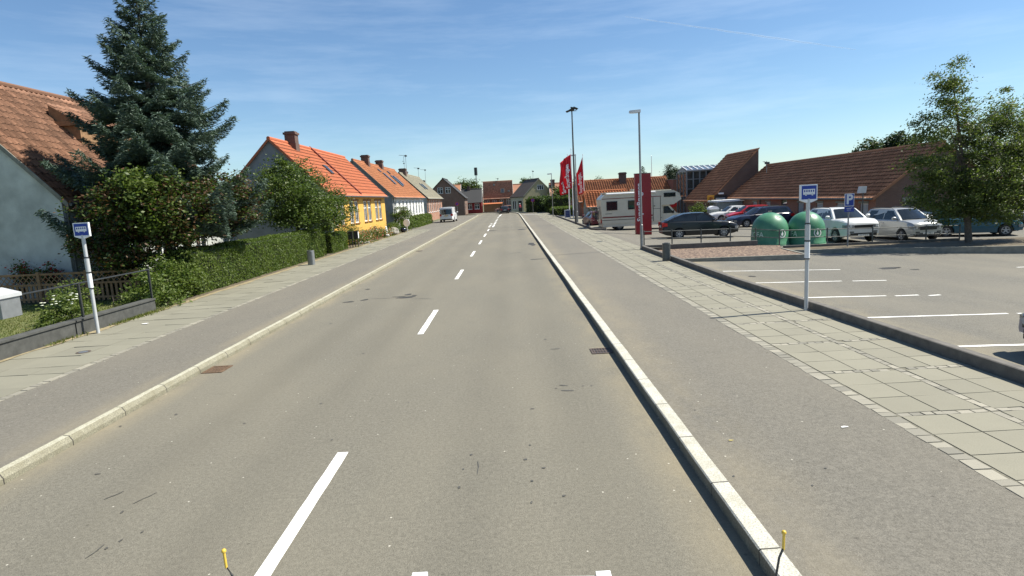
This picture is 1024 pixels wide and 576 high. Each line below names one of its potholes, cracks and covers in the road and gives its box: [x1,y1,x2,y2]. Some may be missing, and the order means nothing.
drain grate [201,365,233,374]
